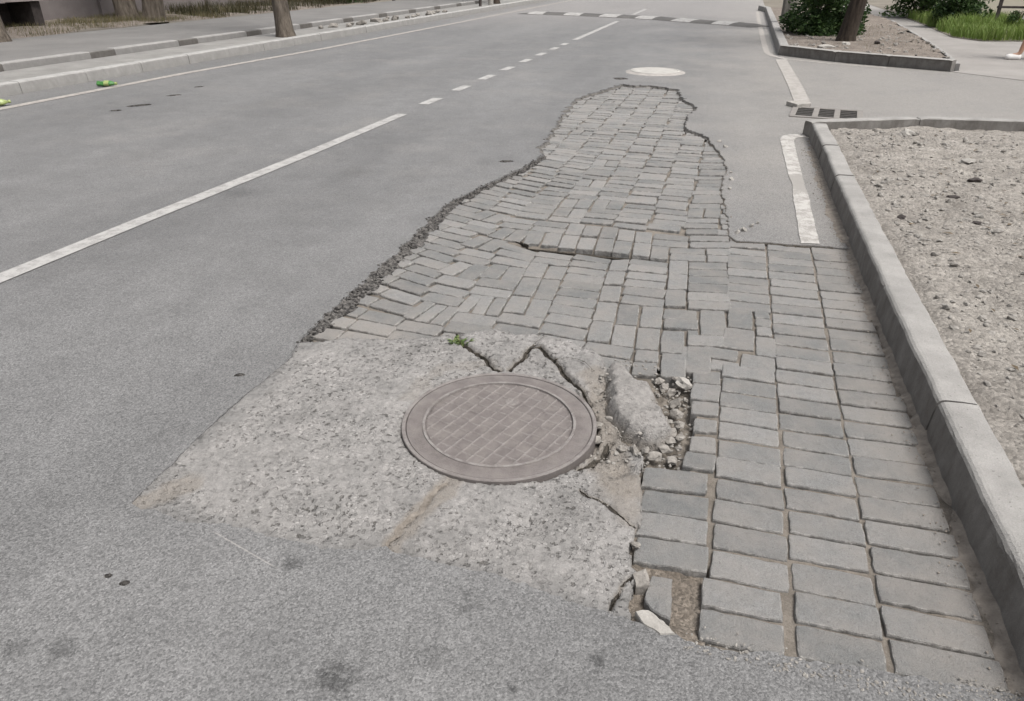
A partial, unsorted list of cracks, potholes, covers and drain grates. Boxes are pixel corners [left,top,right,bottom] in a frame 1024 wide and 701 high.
manhole cover [401,373,597,486]
drain grate [789,106,863,119]
crack [580,491,636,529]
manhole cover [626,67,685,76]
crack [496,230,631,262]
crack [610,578,633,611]
crack [455,333,594,408]
crack [578,443,609,471]
pothole [605,373,693,480]
pothole [628,562,705,646]
